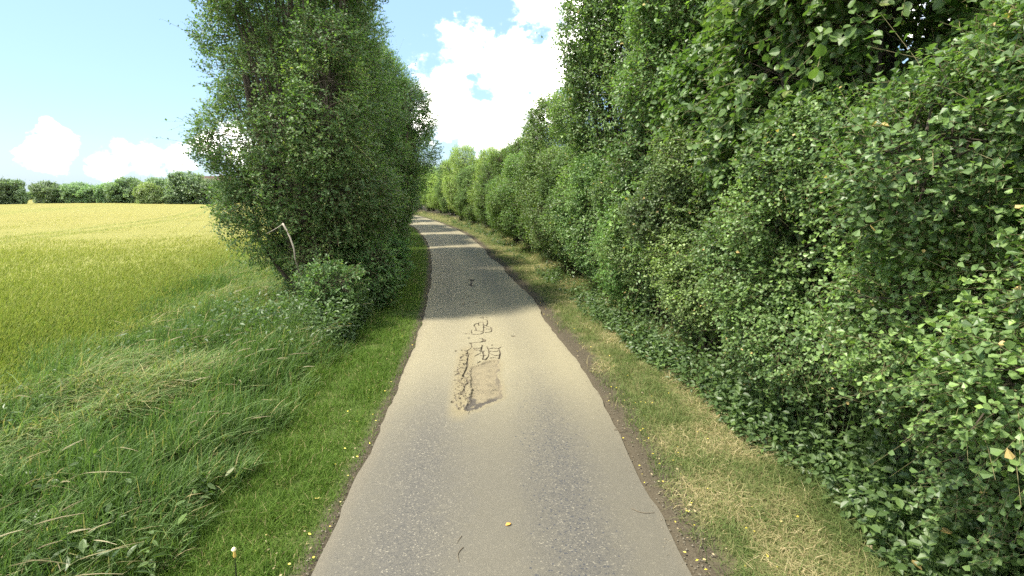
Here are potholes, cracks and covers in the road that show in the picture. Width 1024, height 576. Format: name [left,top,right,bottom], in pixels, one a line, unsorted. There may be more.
crack [453,317,501,408]
pothole [464,360,504,411]
